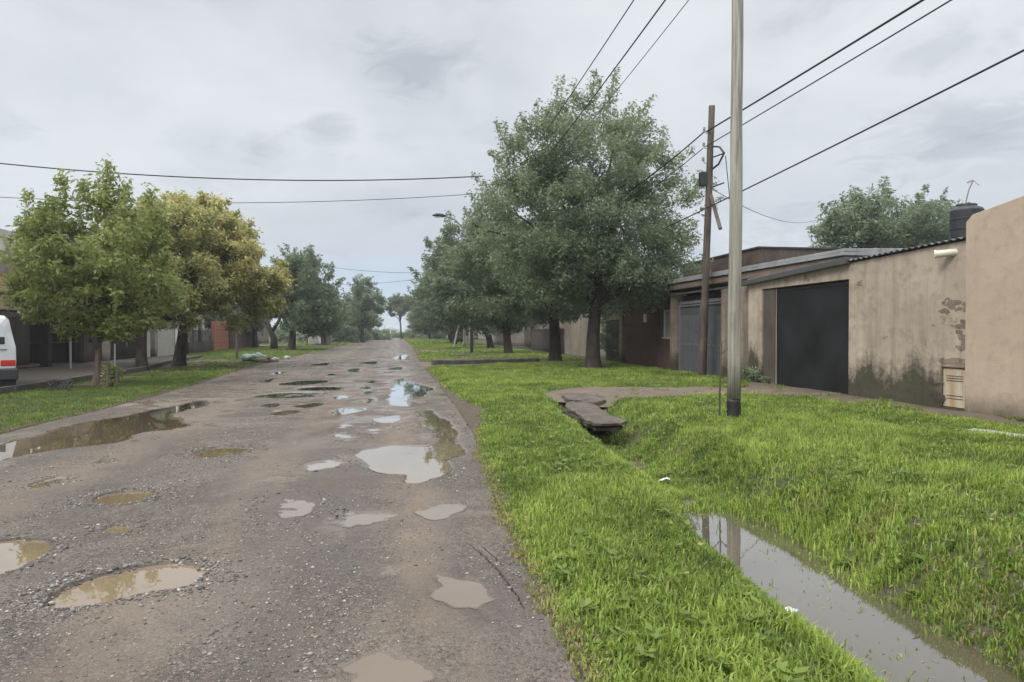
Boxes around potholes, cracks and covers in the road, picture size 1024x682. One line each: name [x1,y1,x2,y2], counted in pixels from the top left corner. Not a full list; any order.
pothole [277,457,358,472]
crack [465,541,525,610]
pothole [383,376,437,407]
pothole [0,550,268,629]
pothole [0,530,100,583]
pothole [327,408,476,483]
